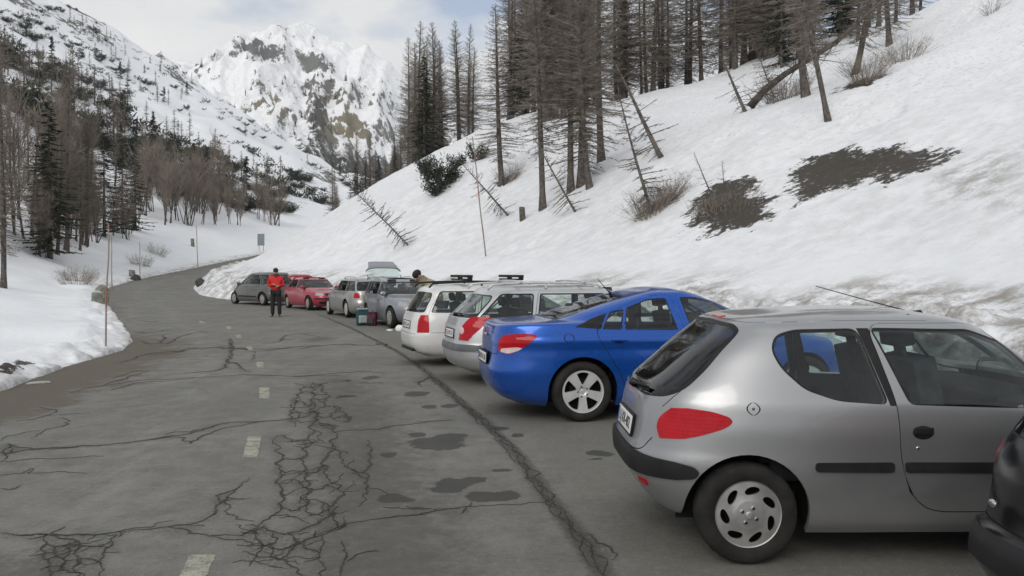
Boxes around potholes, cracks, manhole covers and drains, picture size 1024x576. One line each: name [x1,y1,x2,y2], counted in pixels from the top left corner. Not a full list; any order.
crack [0,321,534,576]
